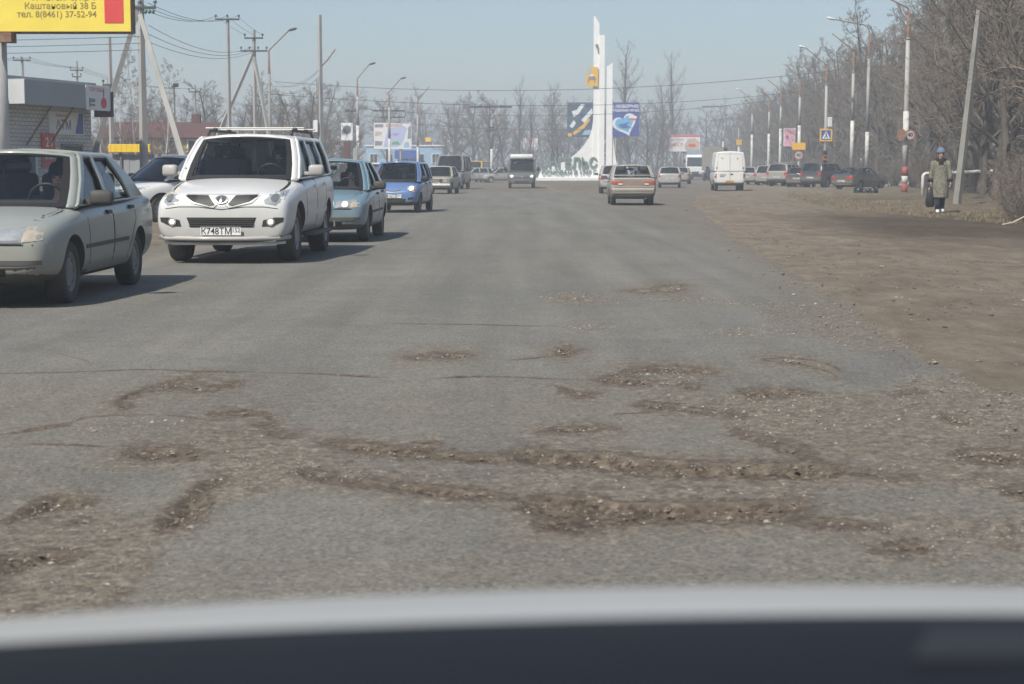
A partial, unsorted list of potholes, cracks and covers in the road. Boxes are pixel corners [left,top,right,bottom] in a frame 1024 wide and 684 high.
pothole [596,377,654,386]
pothole [321,438,506,463]
pothole [516,495,814,532]
pothole [122,447,216,461]
pothole [555,347,576,356]
crack [0,414,225,447]
crack [434,356,583,380]
pothole [155,475,226,530]
pothole [5,495,93,521]
pothole [292,471,511,500]
crack [0,341,390,378]
pothole [623,366,716,374]
